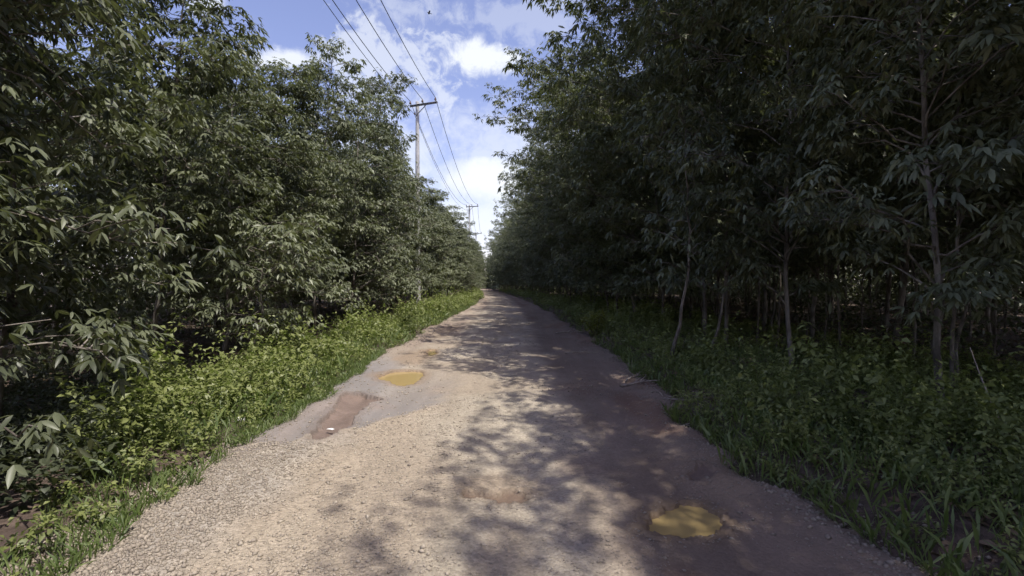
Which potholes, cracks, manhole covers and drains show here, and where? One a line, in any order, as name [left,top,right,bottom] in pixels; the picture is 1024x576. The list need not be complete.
pothole [453,486,541,509]
pothole [297,391,389,443]
pothole [366,368,432,387]
pothole [630,499,738,545]
pothole [418,348,445,357]
